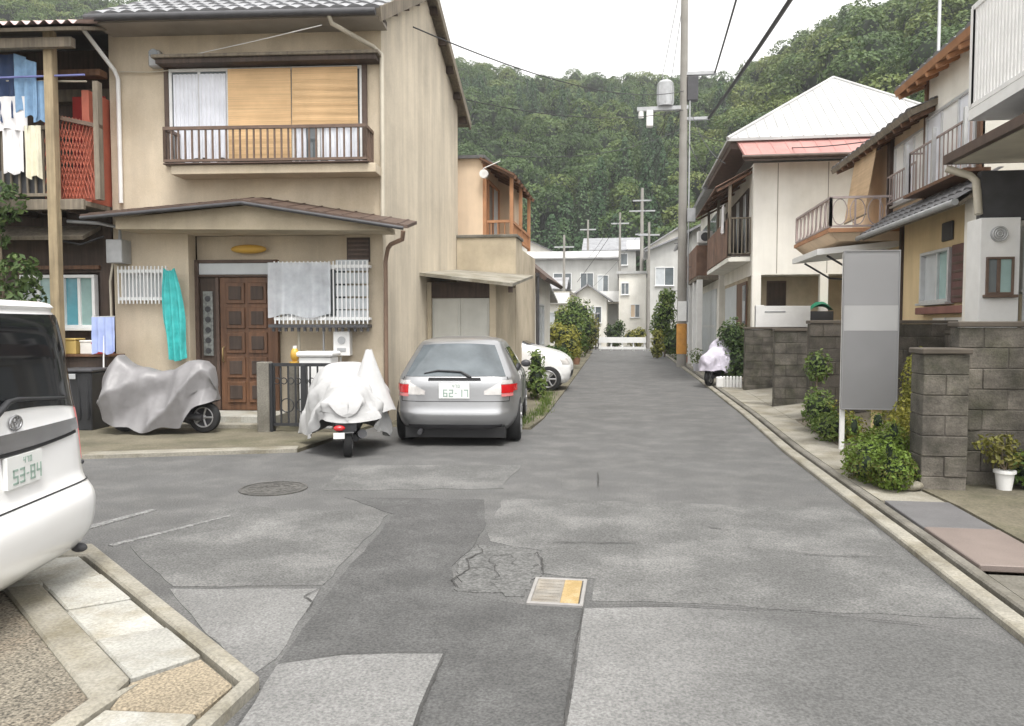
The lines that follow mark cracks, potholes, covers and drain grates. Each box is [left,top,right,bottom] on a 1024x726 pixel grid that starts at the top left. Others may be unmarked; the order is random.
manhole cover [238,481,308,496]
crack [451,544,544,587]
